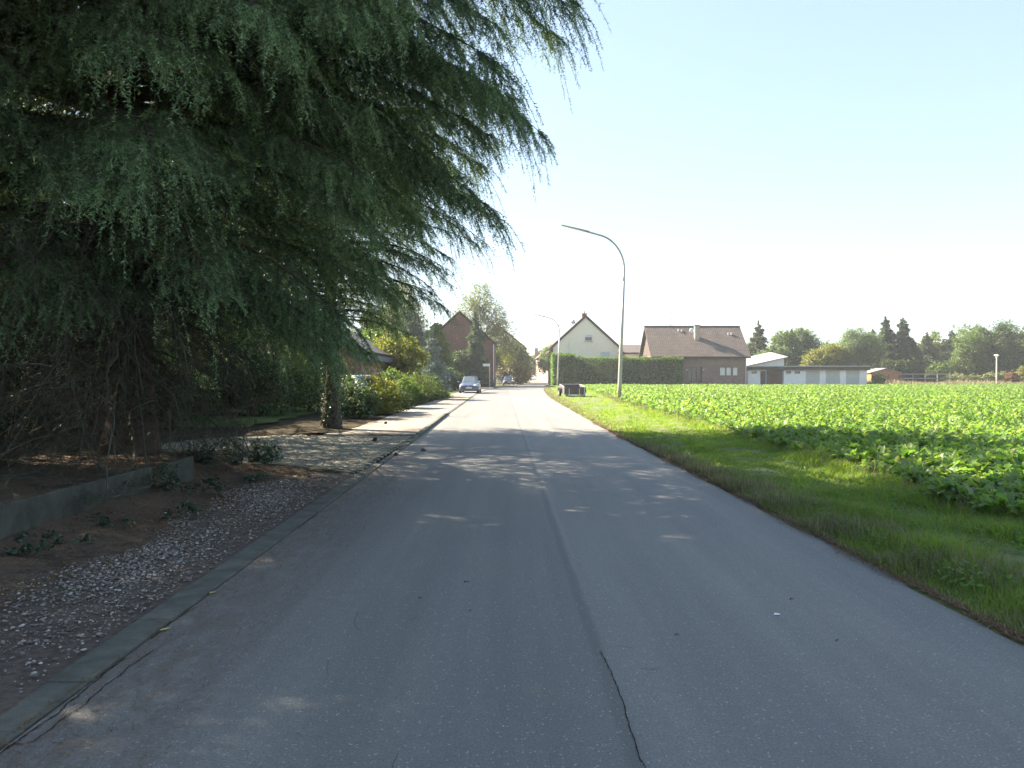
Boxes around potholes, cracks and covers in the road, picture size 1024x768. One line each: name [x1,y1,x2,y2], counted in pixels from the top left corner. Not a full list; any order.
crack [0,650,153,753]
crack [601,645,646,768]
